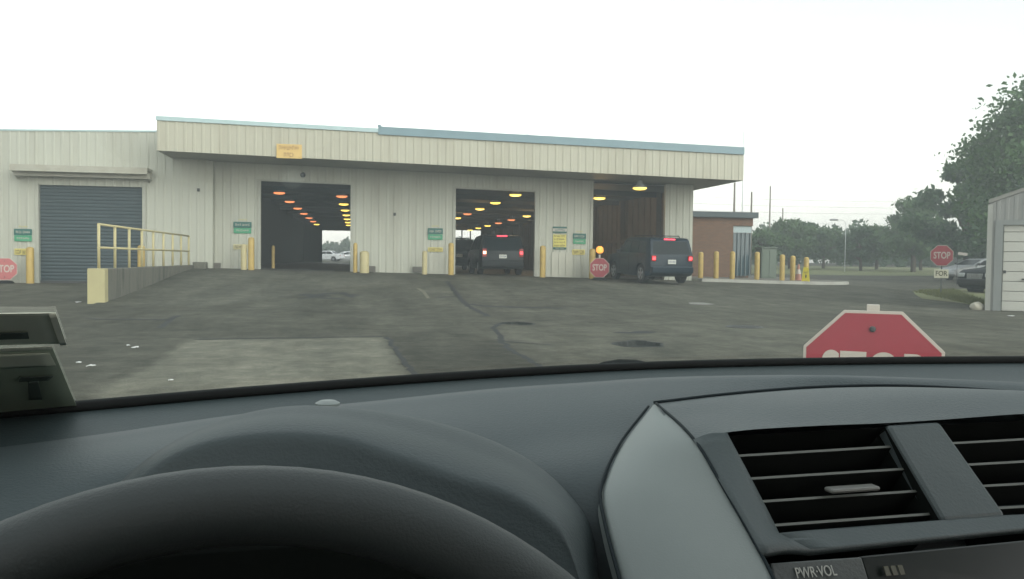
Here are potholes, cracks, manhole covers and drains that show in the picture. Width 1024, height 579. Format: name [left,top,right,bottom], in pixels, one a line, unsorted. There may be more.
crack [437,281,550,367]
